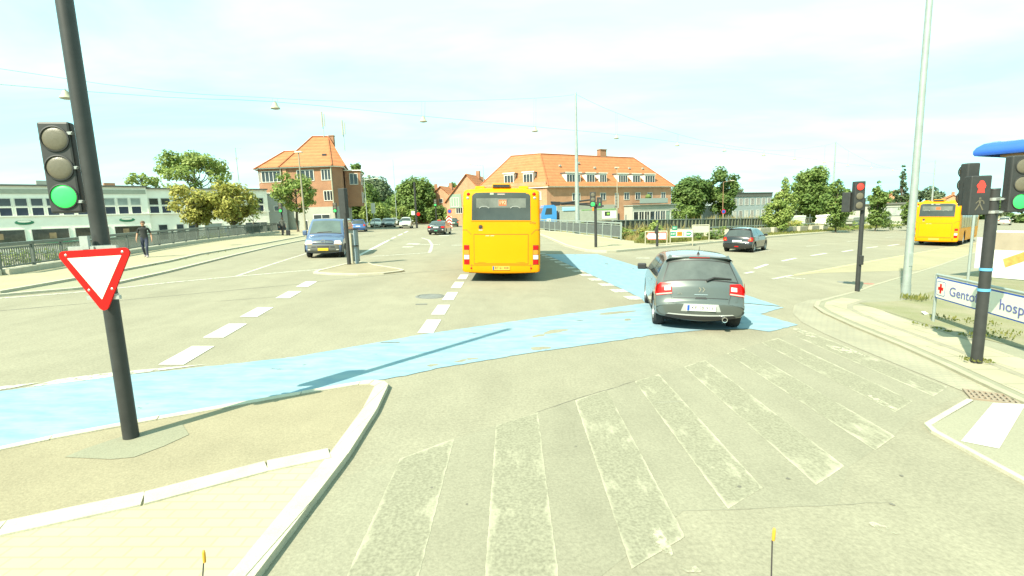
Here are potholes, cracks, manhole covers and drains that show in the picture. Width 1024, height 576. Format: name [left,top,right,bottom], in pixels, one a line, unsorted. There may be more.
drain grate [962,388,1021,404]
